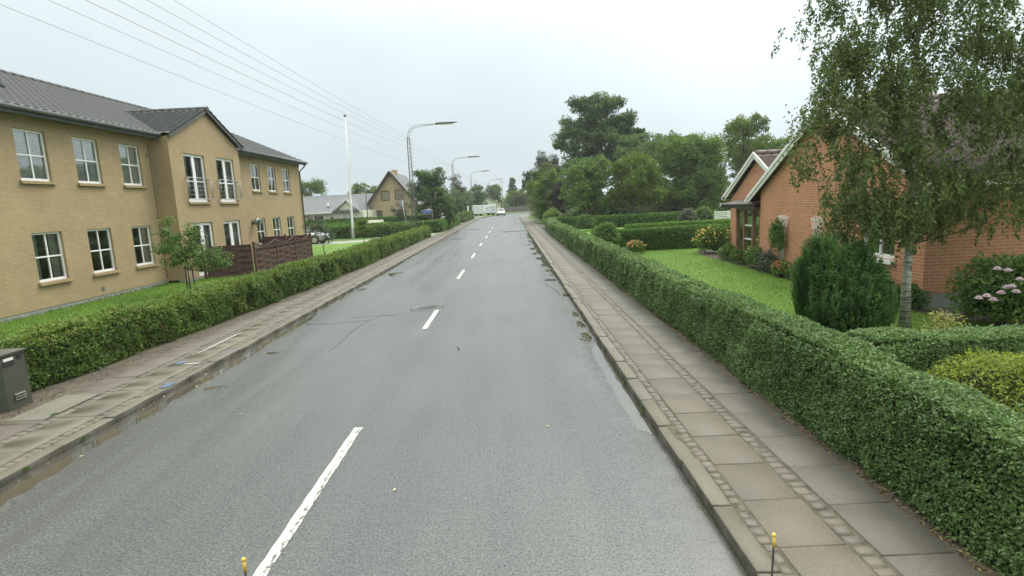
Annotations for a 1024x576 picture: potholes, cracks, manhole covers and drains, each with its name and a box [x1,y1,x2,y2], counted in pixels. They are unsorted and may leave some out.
manhole cover [409,304,445,312]
crack [303,315,397,351]
